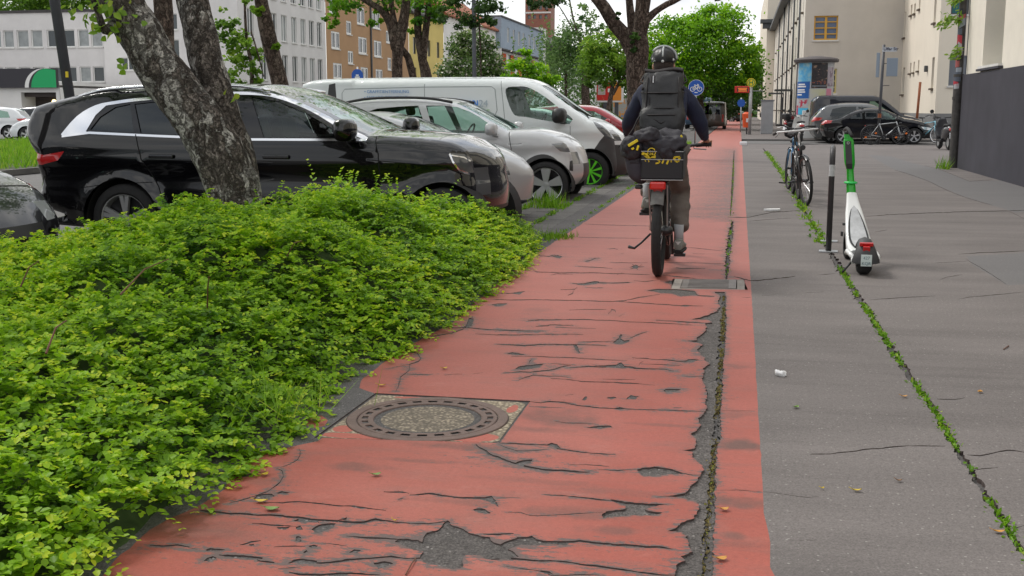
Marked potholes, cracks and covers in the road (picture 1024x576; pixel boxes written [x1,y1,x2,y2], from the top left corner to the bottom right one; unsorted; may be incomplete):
crack [200,247,836,576]
drain grate [672,279,745,298]
crack [819,445,927,455]
crack [874,251,1020,300]
manhole cover [320,395,526,443]
